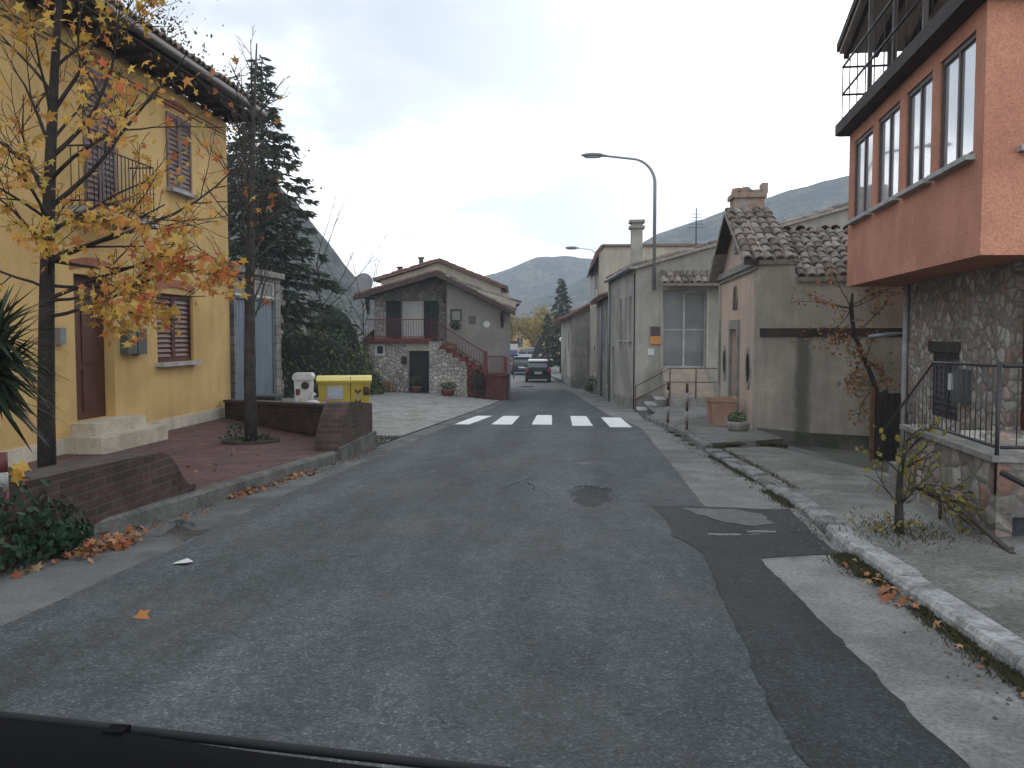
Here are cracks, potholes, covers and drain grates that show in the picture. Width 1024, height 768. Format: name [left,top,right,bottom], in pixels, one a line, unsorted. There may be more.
pothole [131,519,223,542]
pothole [567,485,619,507]
